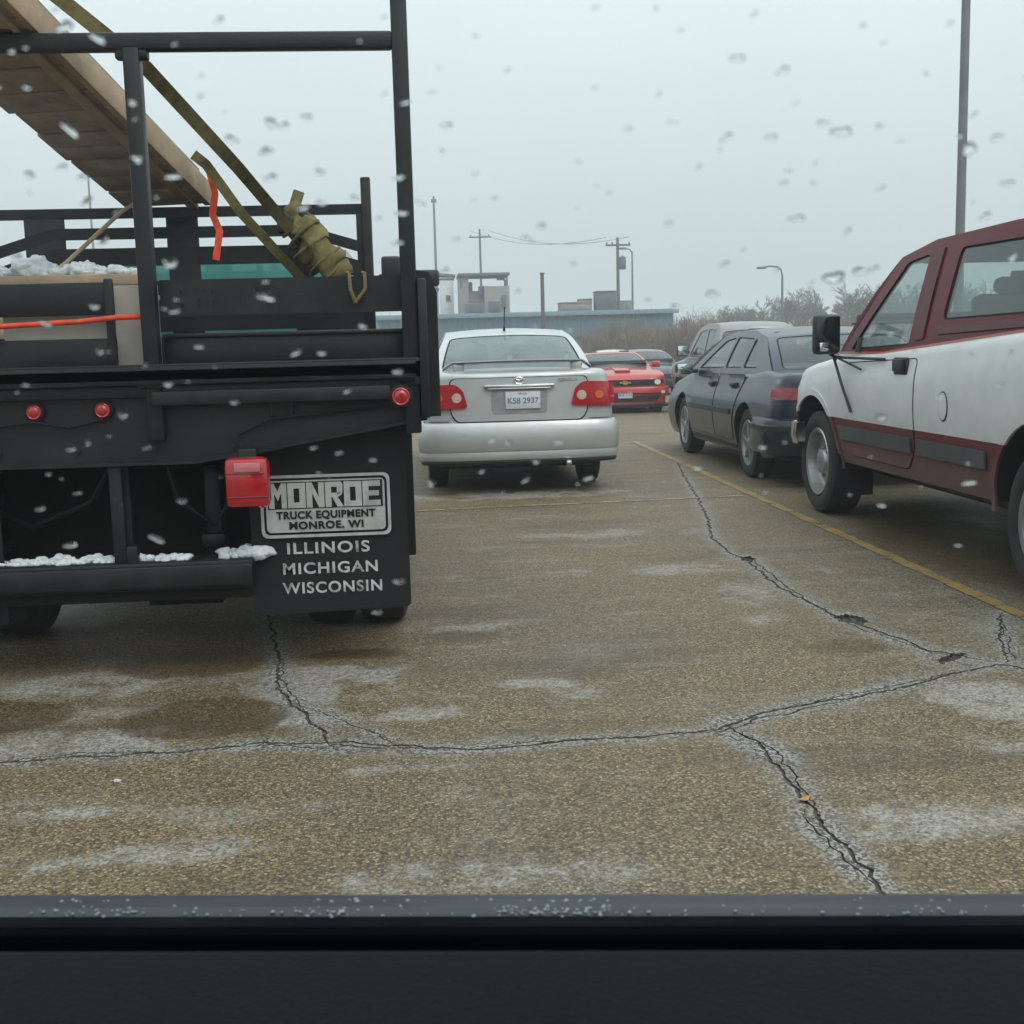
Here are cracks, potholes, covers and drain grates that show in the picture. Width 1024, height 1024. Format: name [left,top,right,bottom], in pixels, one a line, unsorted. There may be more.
crack [0,463,1024,894]
